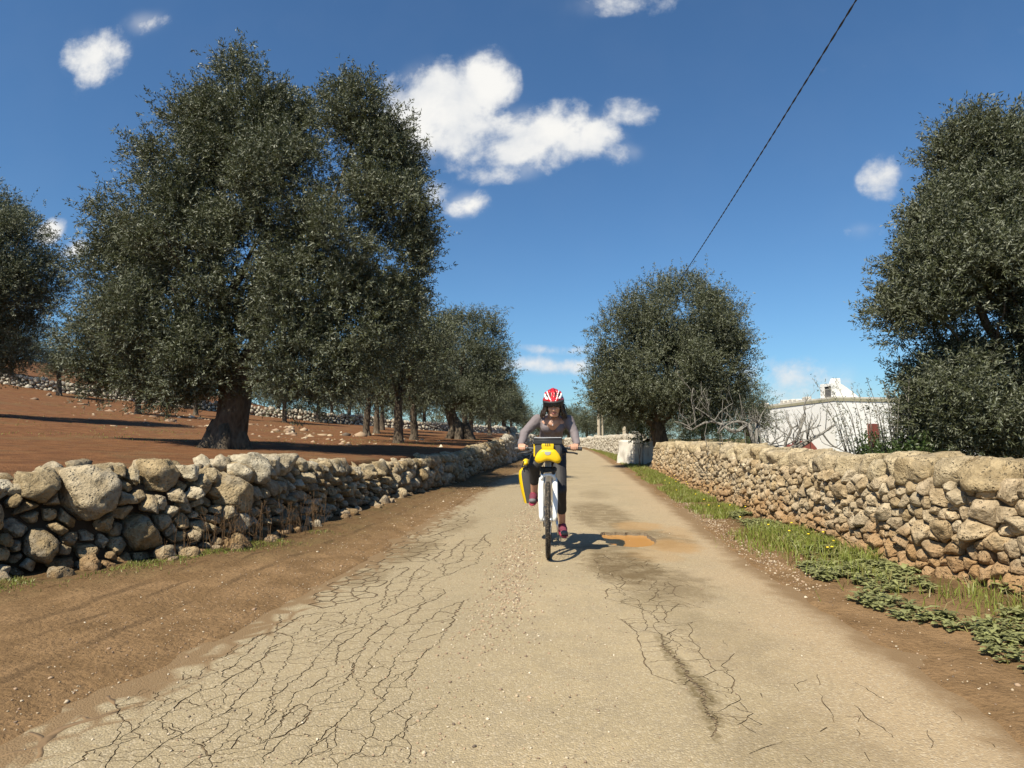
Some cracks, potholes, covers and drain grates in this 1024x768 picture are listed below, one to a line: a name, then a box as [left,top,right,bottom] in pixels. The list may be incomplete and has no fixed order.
crack [794,674,894,761]
pothole [600,532,657,547]
crack [0,510,491,768]
crack [594,555,763,737]
